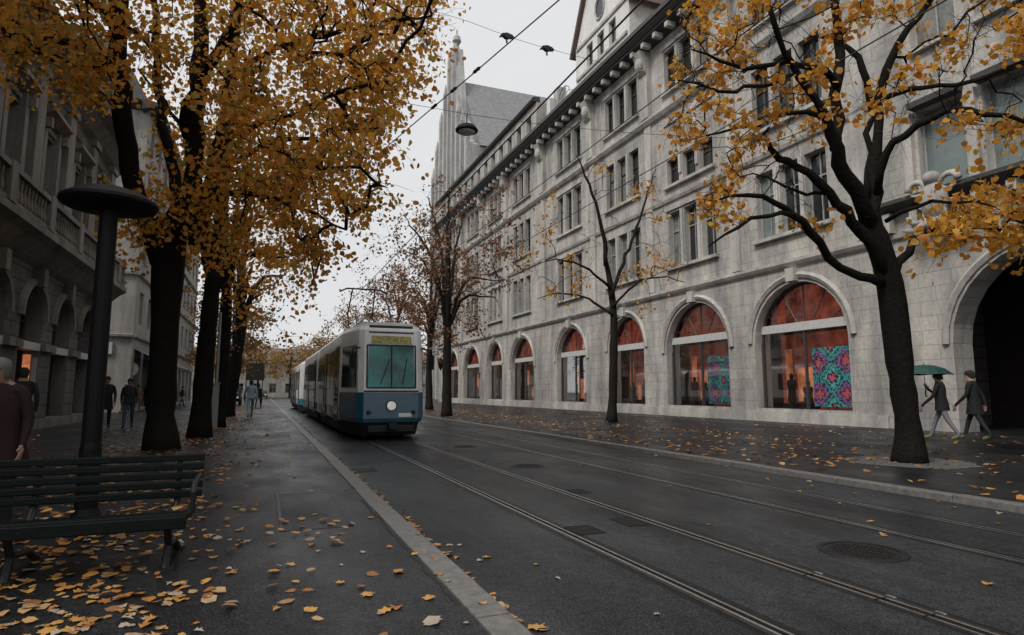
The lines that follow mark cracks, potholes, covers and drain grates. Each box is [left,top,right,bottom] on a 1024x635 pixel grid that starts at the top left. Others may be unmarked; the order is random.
manhole cover [816,541,911,562]
